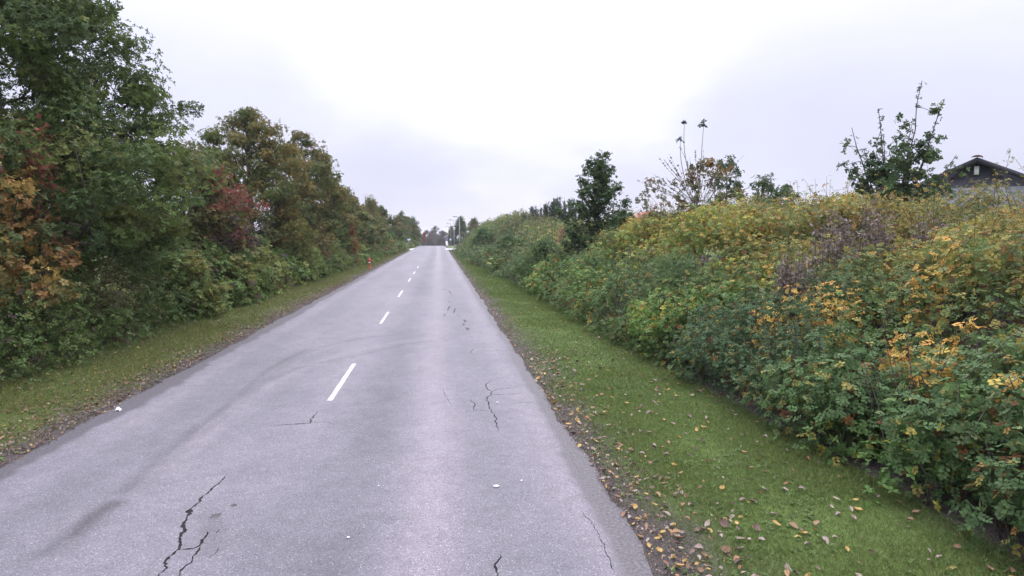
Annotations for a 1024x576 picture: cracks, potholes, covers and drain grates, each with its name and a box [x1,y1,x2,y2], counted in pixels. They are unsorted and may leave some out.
crack [470,383,532,430]
crack [158,475,226,576]
